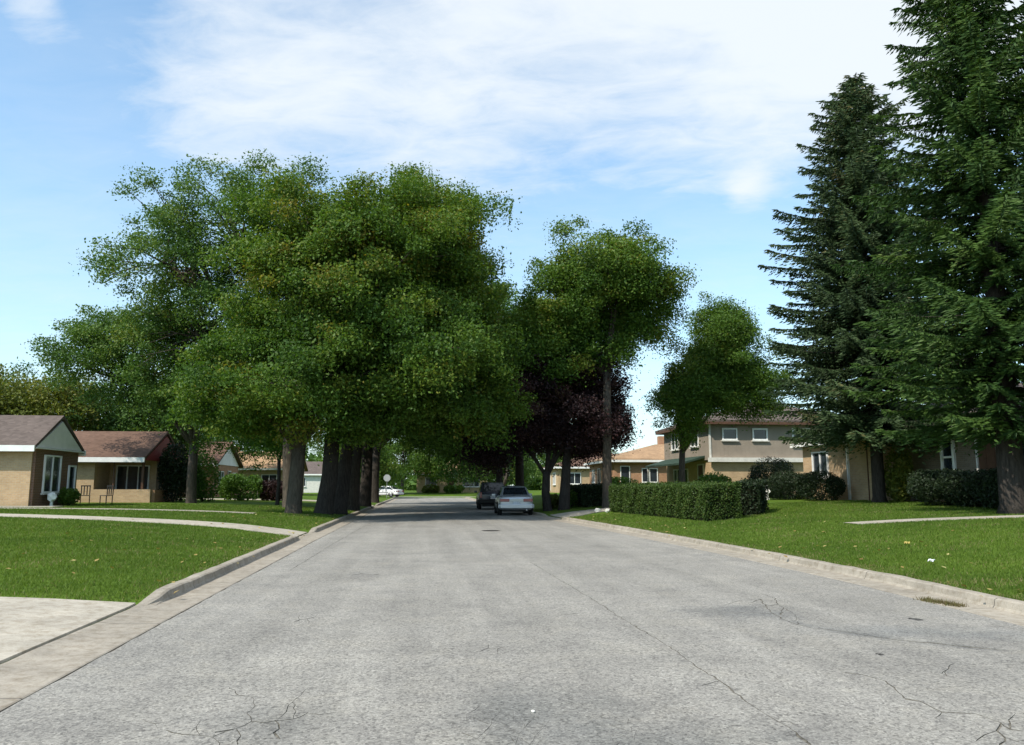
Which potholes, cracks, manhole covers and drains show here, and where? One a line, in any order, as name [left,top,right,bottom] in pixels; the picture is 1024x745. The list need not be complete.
crack [532,563,811,745]
crack [843,672,1024,745]
crack [143,687,335,745]
crack [729,596,1005,676]
